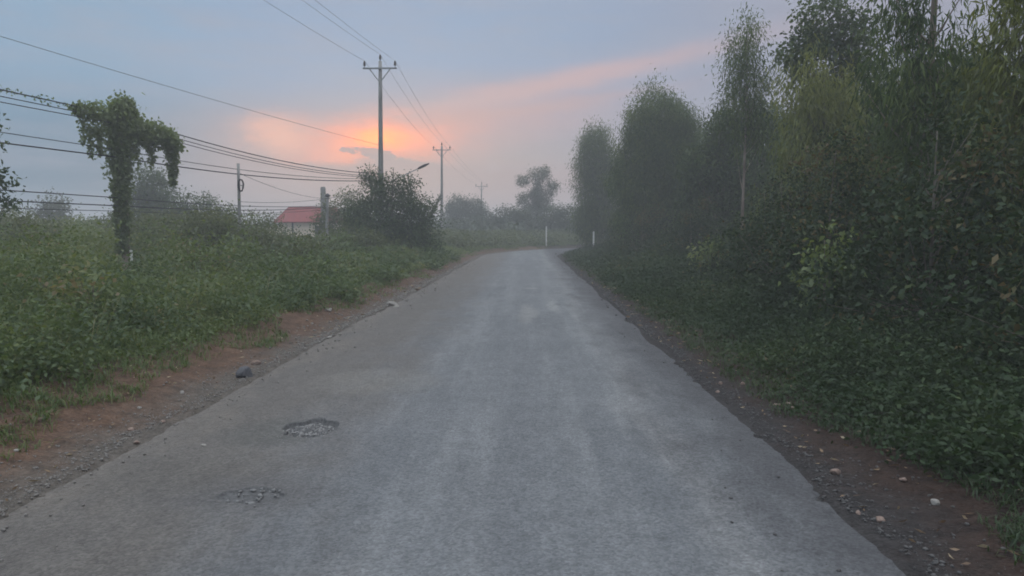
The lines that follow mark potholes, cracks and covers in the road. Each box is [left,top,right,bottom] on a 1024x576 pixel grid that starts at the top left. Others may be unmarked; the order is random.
pothole [265,413,355,443]
pothole [200,484,299,508]
